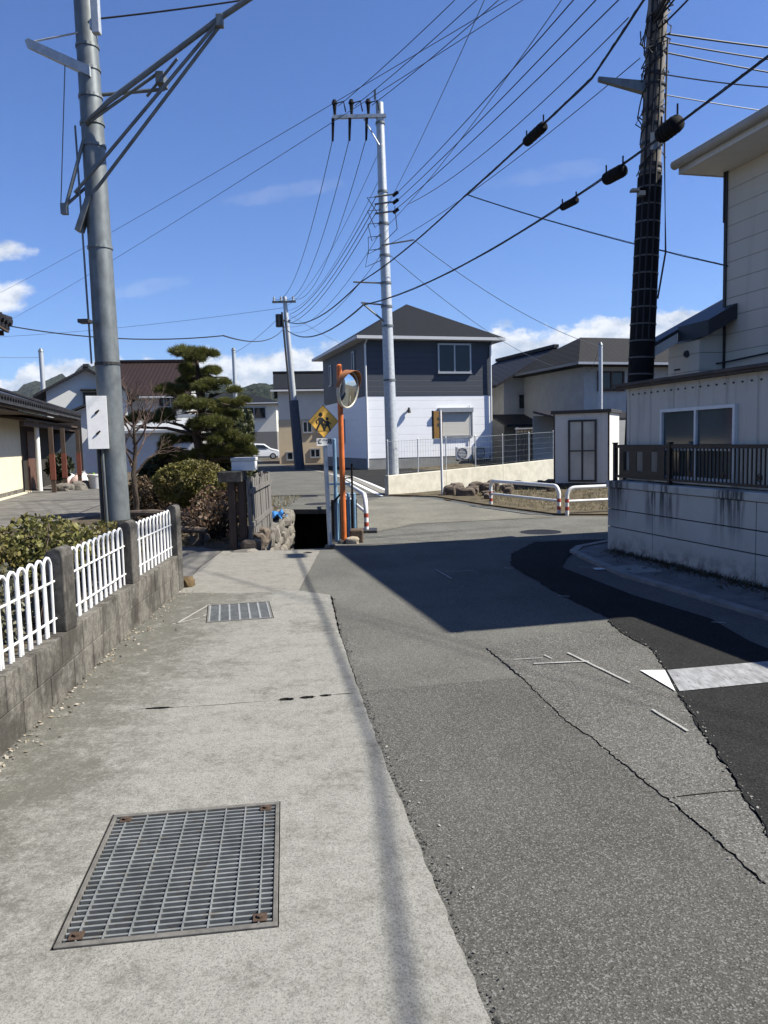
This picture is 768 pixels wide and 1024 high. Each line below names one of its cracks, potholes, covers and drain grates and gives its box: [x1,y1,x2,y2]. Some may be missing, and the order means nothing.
crack [486,647,768,884]
drain grate [50,801,280,951]
drain grate [206,601,274,623]
